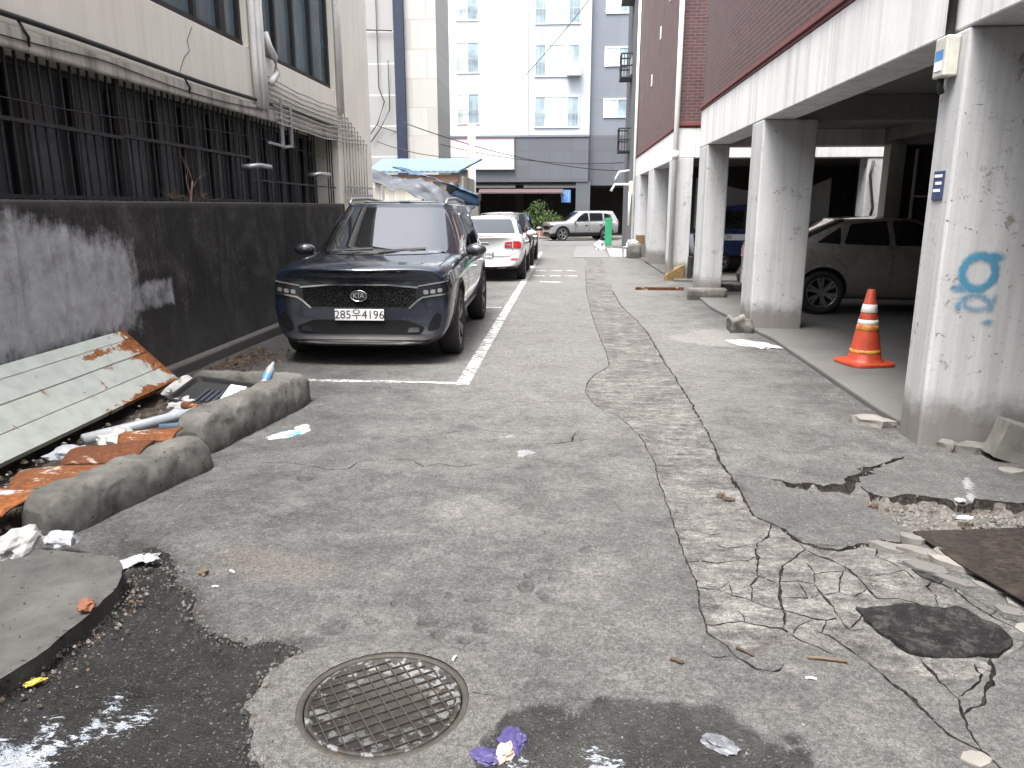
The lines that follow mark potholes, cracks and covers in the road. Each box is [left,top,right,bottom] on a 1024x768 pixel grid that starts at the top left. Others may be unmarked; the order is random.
crack [439,430,593,445]
crack [679,507,1015,768]
pothole [862,496,1024,532]
manhole cover [295,653,469,763]
crack [262,459,477,470]
